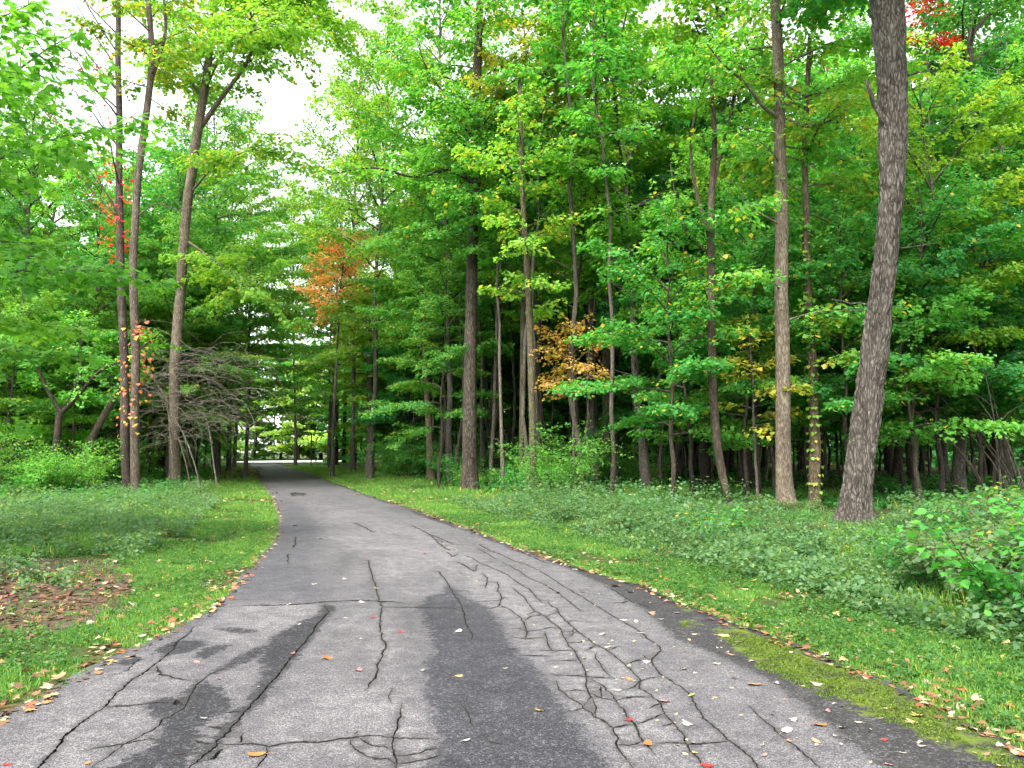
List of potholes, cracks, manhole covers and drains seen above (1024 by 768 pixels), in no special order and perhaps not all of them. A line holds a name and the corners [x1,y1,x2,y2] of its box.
crack [37,525,473,768]
crack [462,546,820,768]
